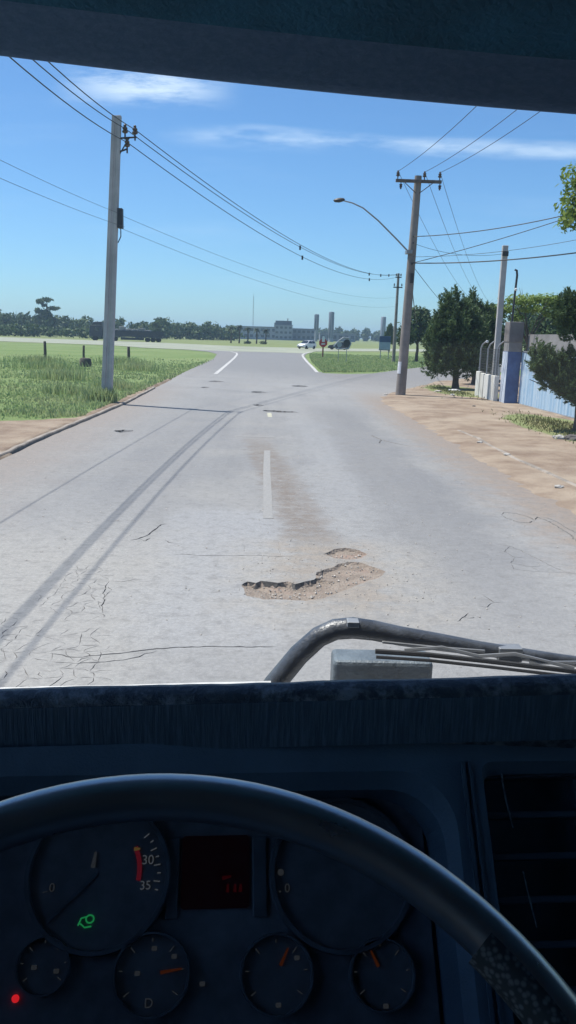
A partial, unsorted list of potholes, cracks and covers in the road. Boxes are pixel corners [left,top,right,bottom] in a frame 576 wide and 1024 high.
crack [494,543,574,574]
crack [134,524,280,557]
crack [501,512,576,540]
pothole [324,548,367,560]
pothole [242,562,385,601]
crack [0,565,265,688]
